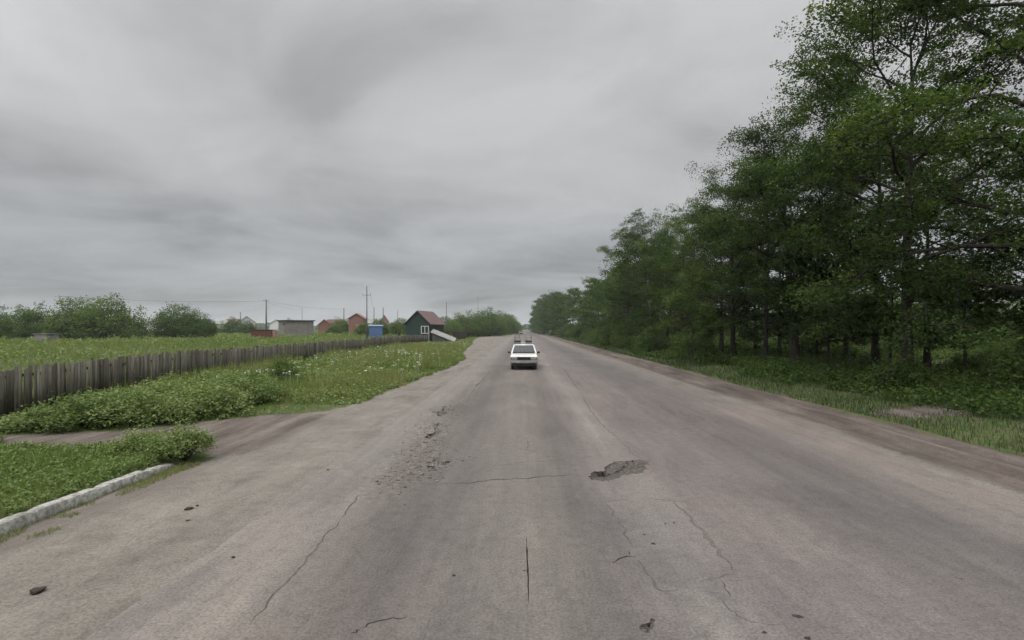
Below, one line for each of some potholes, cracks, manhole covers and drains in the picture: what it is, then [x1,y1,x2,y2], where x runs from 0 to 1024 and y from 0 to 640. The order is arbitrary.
crack [389,440,597,485]
crack [251,495,359,622]
pothole [425,423,449,439]
pothole [427,457,450,471]
crack [352,616,407,633]
crack [604,499,783,625]
crack [564,370,637,457]
pothole [588,460,649,481]
pothole [639,618,655,633]
